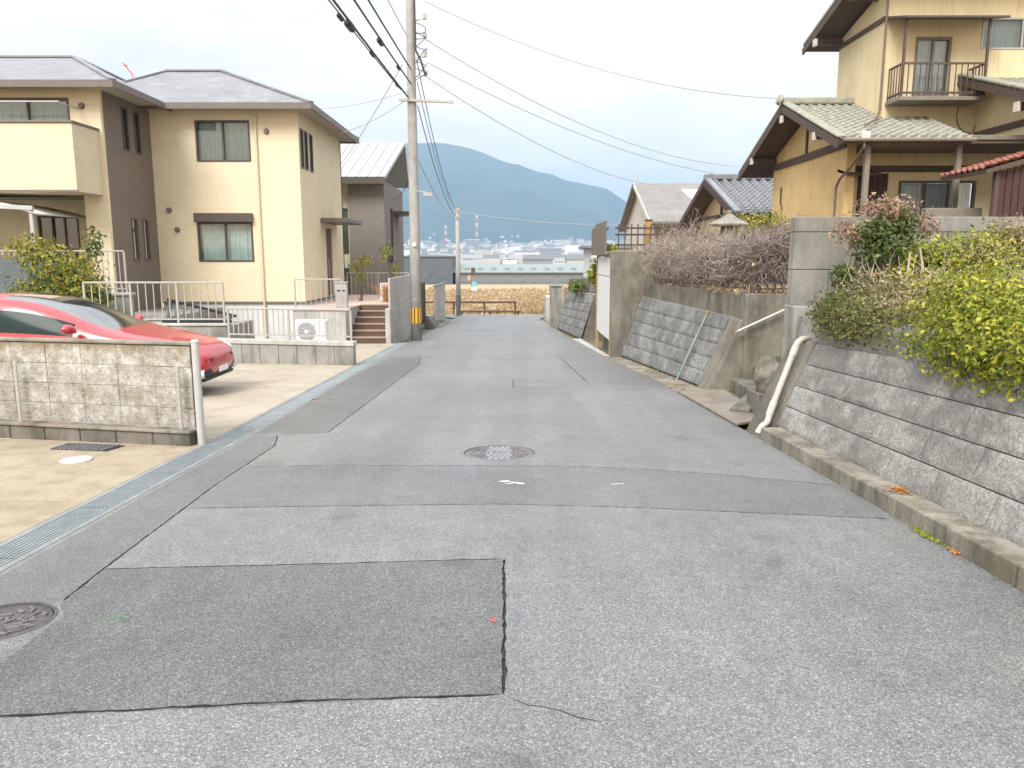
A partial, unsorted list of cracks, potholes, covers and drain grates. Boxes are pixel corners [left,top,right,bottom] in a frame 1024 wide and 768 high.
manhole cover [0,602,59,640]
drain grate [50,443,126,452]
manhole cover [461,445,537,461]
